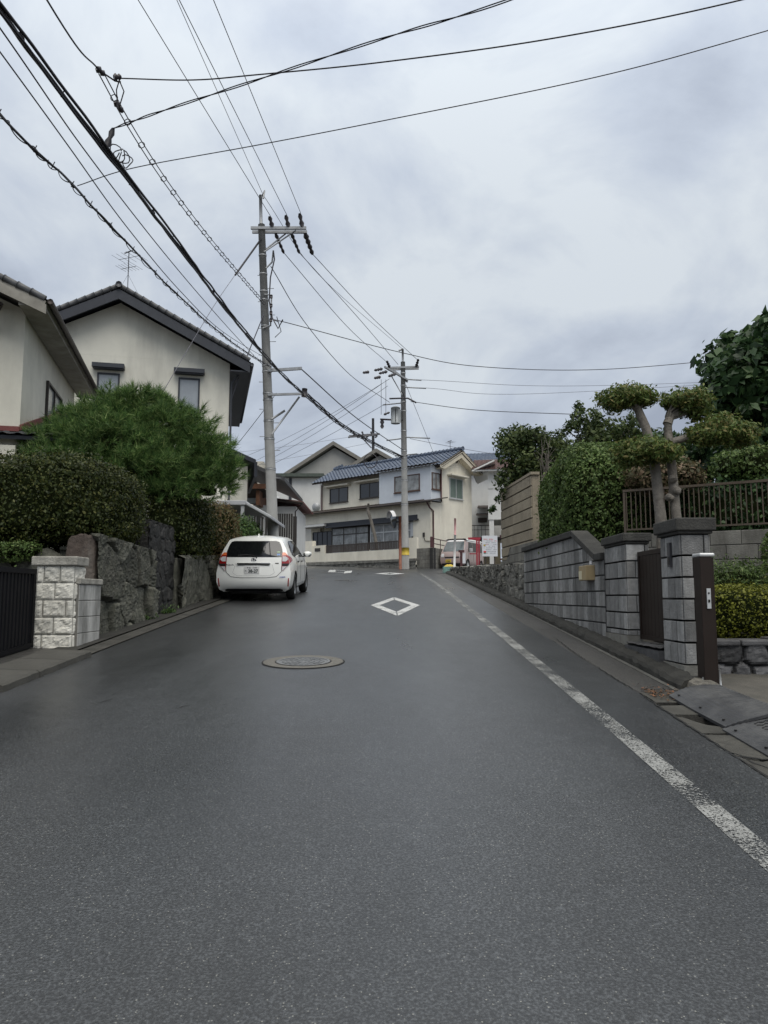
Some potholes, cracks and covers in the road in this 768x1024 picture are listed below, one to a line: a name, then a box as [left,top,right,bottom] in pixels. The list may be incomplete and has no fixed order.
manhole cover [262,655,345,669]
